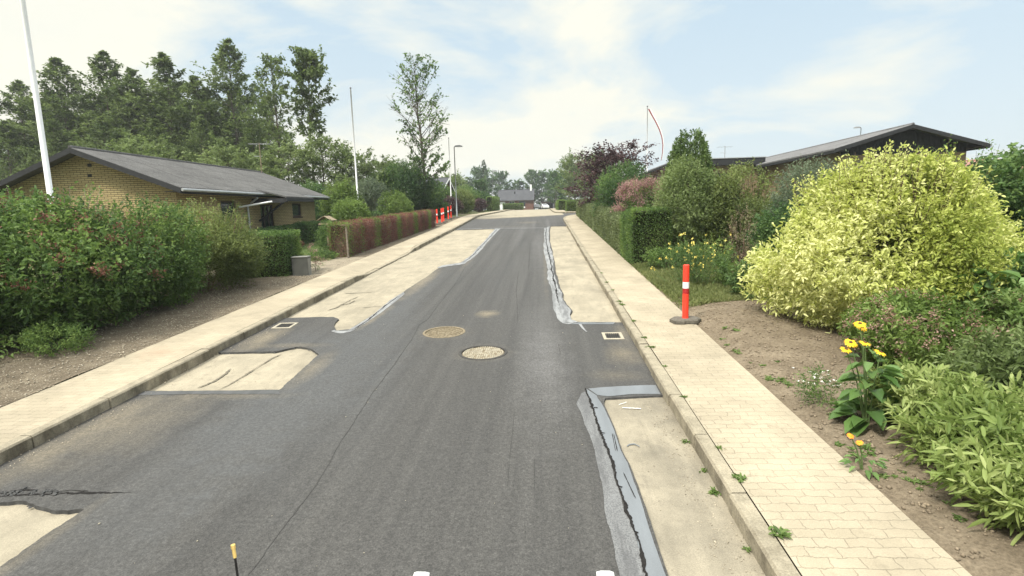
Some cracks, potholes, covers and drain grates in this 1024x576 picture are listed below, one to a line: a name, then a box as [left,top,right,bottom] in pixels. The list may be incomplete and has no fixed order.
manhole cover [459,345,508,360]
crack [1,489,127,497]
drain grate [602,332,624,340]
manhole cover [423,326,465,338]
